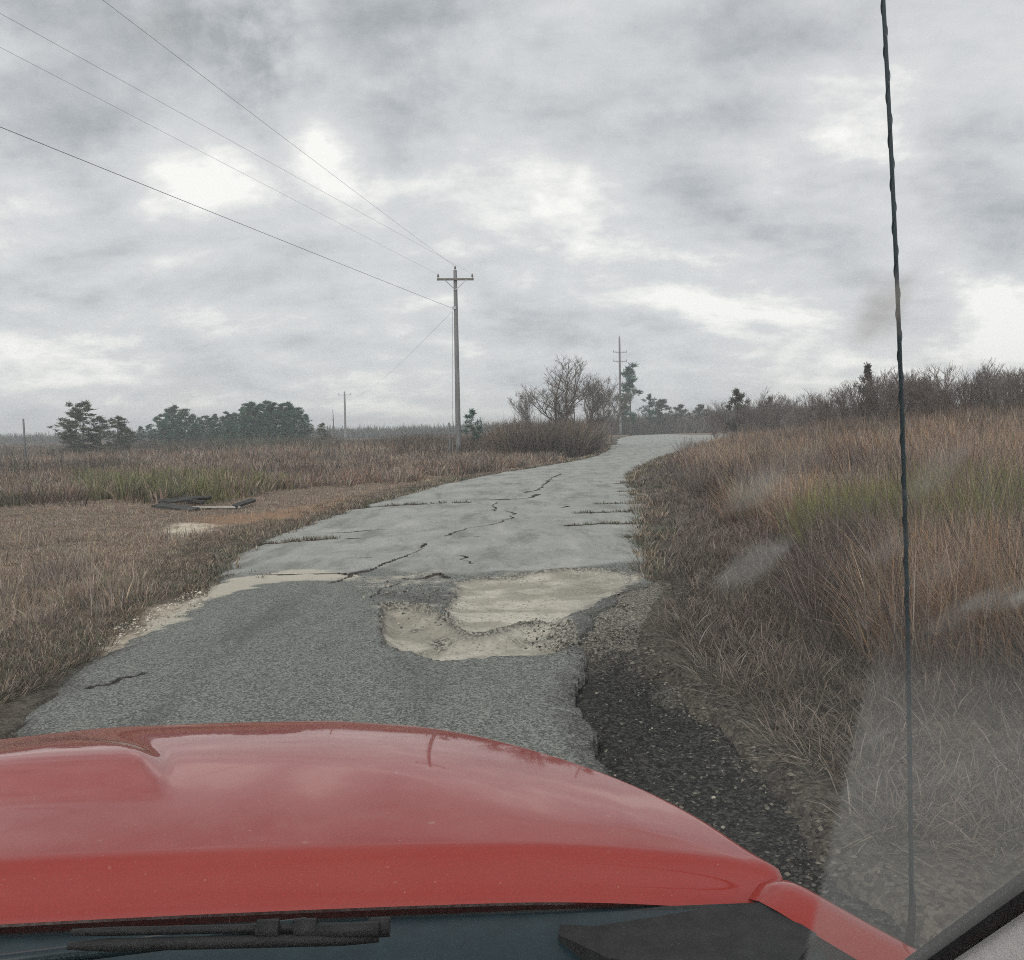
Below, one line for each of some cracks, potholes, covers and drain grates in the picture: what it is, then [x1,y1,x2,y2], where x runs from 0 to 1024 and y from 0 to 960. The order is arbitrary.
pothole [444,567,633,632]
crack [345,500,472,510]
crack [250,528,386,546]
crack [86,672,146,689]
crack [445,474,561,537]
pothole [378,601,581,661]
